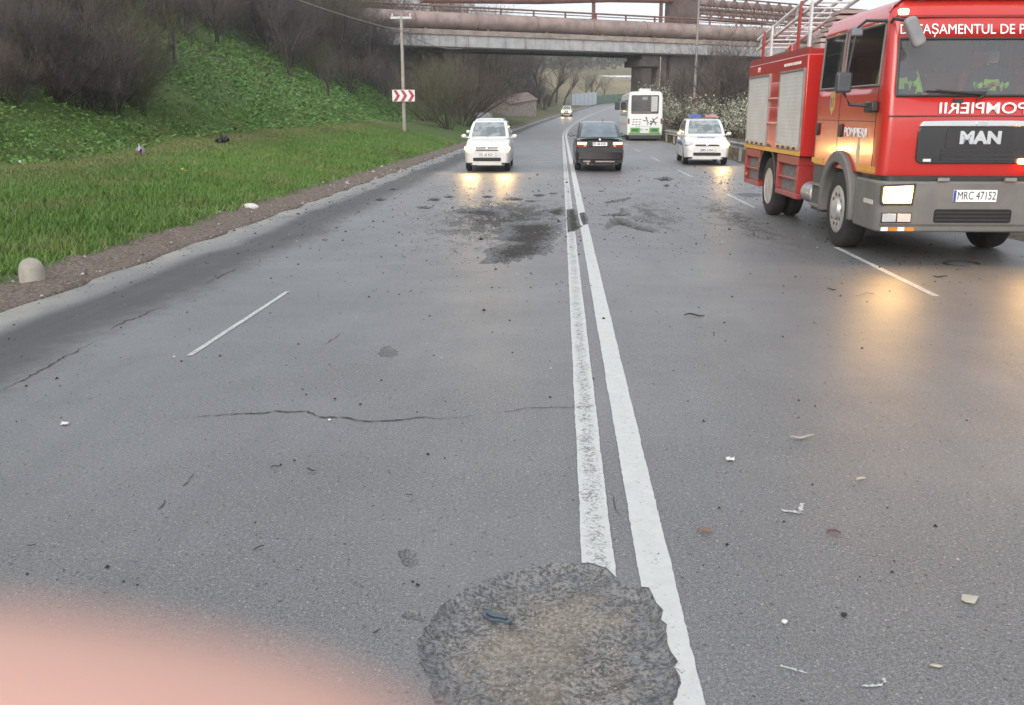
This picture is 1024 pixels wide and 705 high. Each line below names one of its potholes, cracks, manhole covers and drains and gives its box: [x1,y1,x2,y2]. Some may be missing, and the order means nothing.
crack [176,410,480,422]
crack [3,348,80,389]
